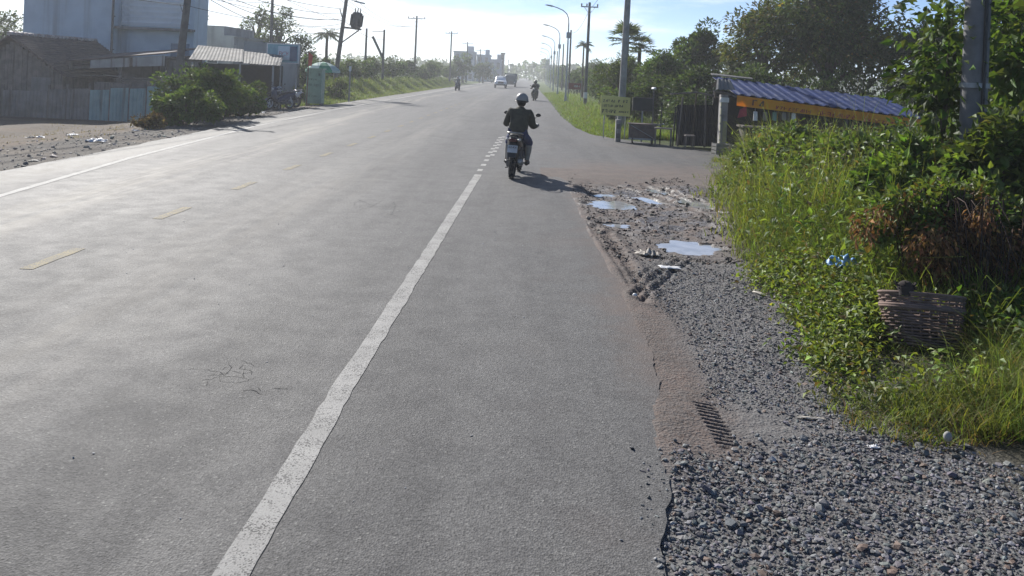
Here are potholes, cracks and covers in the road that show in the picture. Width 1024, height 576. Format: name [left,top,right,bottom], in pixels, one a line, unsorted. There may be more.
crack [204,361,287,394]
